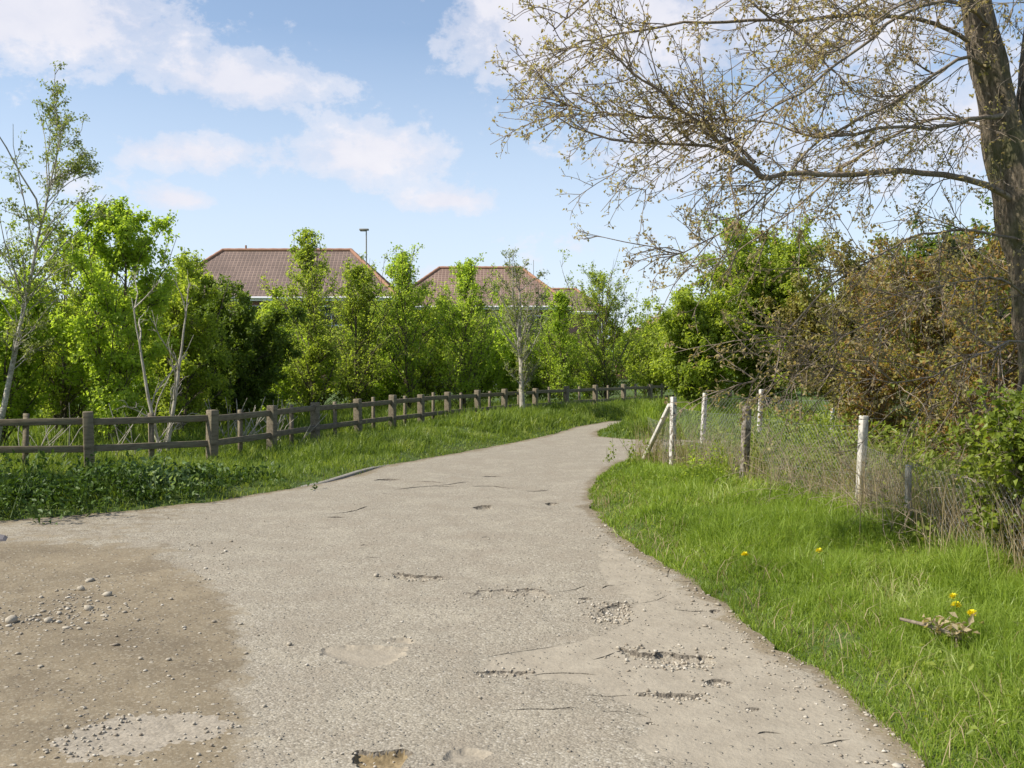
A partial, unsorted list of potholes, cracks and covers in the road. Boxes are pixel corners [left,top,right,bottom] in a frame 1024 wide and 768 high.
pothole [461,667,535,683]
pothole [577,600,649,629]
crack [530,653,613,676]
pothole [628,688,710,705]
pothole [379,571,445,582]
crack [377,476,506,489]
pothole [604,643,717,673]
pothole [336,744,414,768]
pothole [455,585,557,603]
